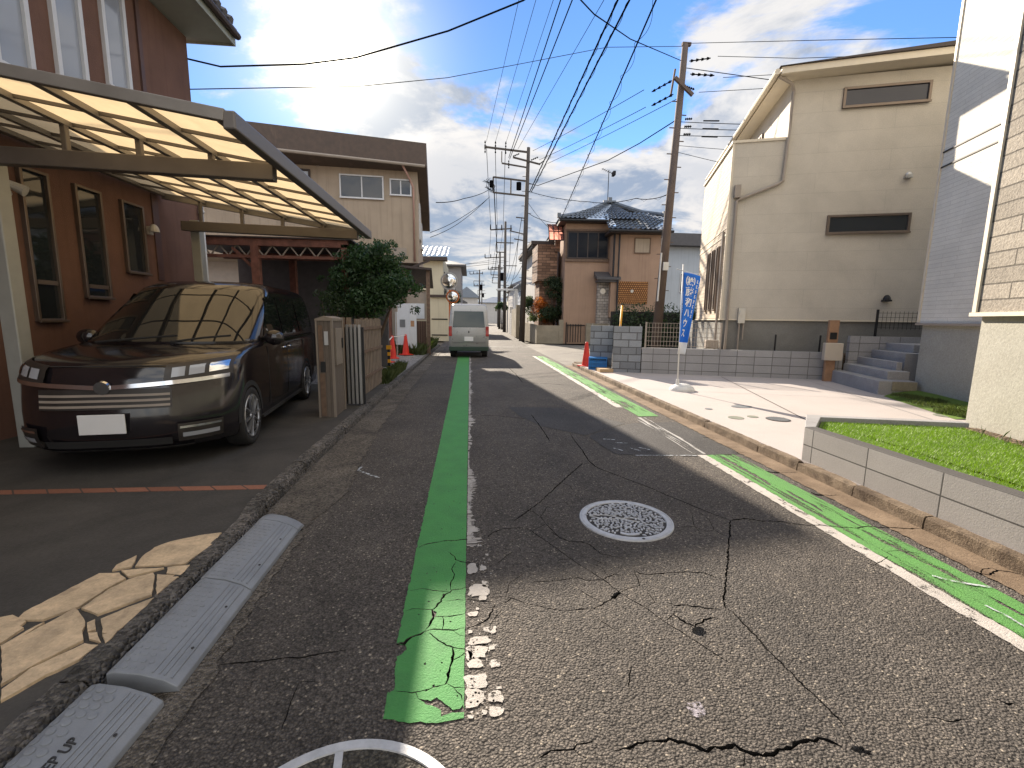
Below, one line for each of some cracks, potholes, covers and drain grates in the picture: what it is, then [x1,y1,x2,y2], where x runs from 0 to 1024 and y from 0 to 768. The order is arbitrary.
crack [397,435,902,766]
crack [221,650,345,730]
manhole cover [579,500,674,542]
pothole [692,626,707,637]
